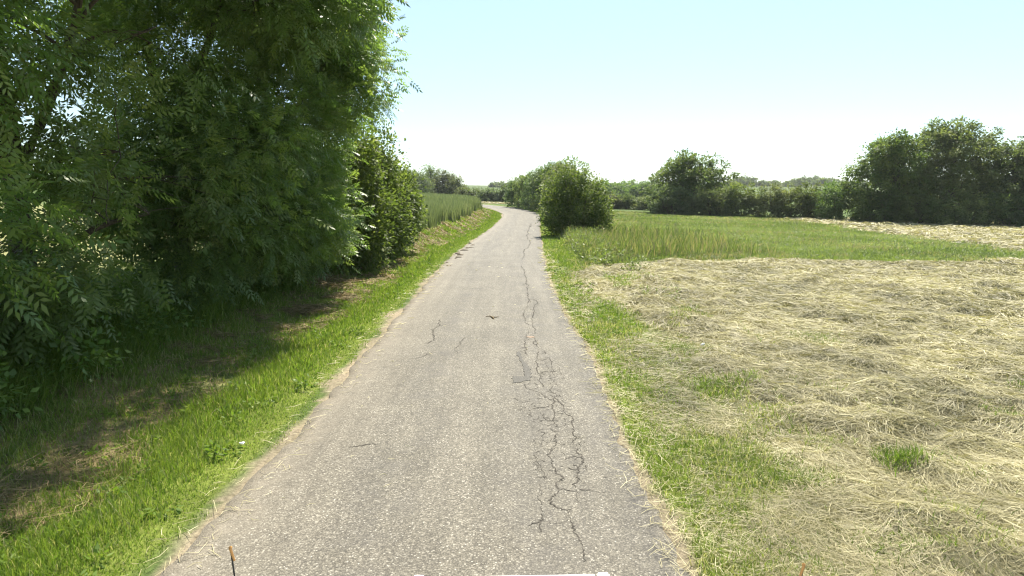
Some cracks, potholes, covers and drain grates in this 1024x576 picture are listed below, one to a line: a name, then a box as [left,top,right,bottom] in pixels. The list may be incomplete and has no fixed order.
crack [515,266,607,561]
